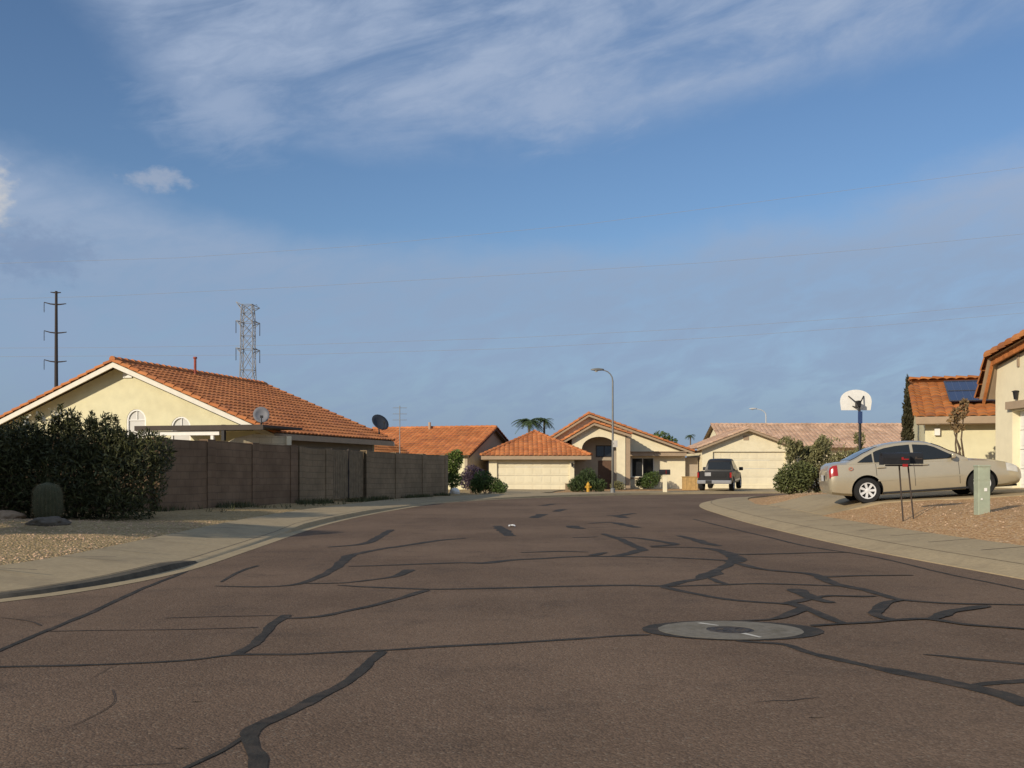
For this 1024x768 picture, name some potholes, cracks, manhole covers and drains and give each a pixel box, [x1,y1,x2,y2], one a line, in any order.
manhole cover [642,620,824,640]
